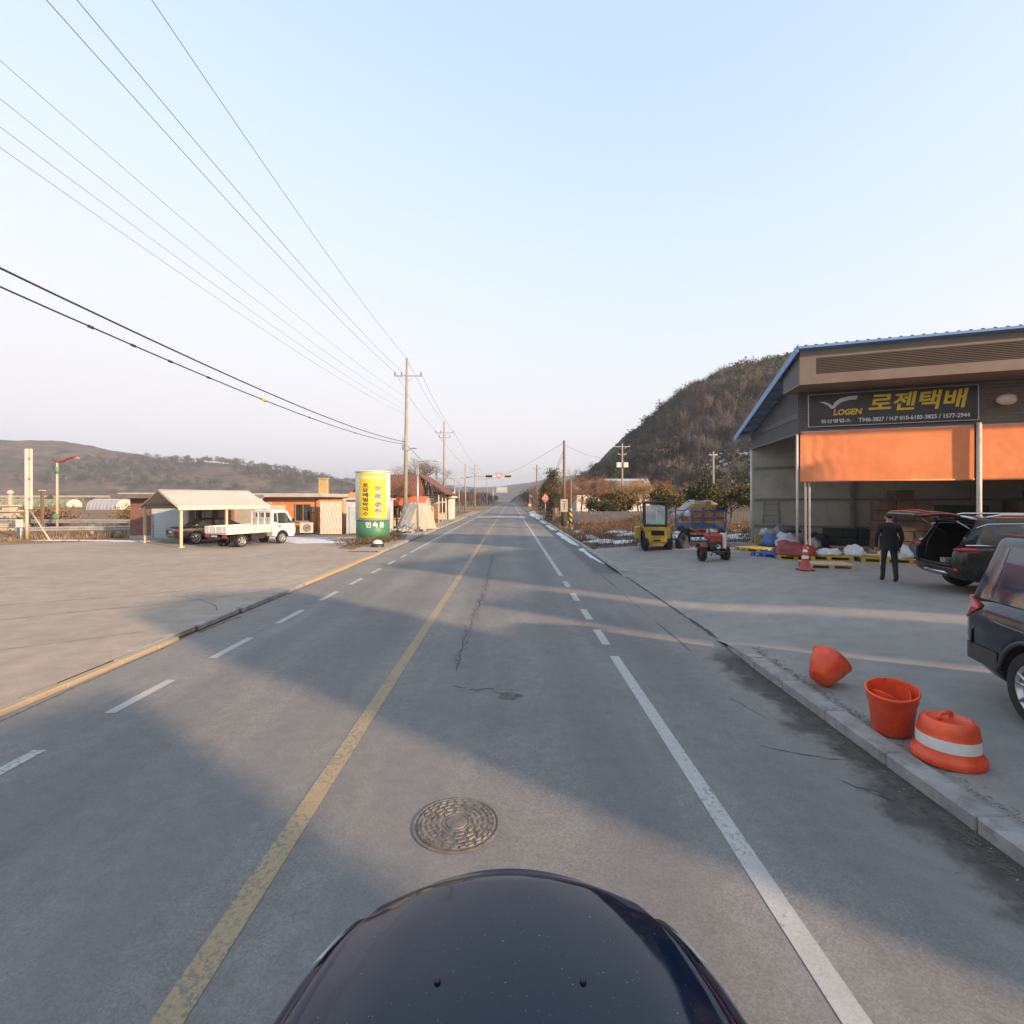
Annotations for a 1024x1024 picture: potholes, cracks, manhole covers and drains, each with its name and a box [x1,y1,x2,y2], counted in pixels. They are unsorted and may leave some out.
pothole [499,692,523,700]
crack [454,554,521,693]
manhole cover [412,797,500,854]
